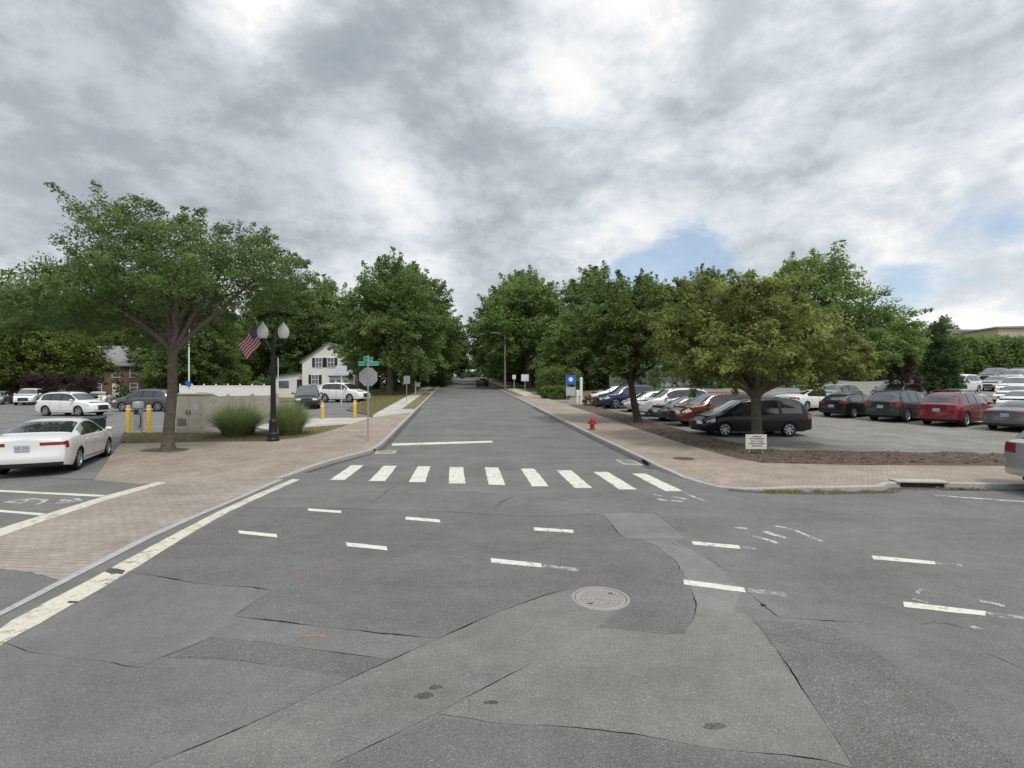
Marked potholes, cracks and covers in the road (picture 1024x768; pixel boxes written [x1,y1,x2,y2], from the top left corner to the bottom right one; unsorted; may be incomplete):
manhole cover [572,587,630,611]
crack [330,665,852,768]
